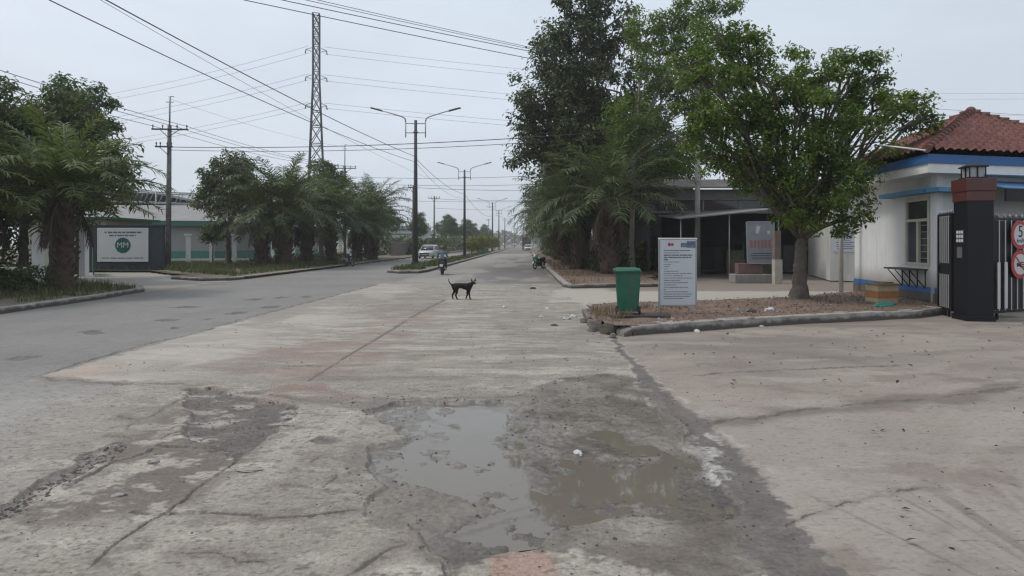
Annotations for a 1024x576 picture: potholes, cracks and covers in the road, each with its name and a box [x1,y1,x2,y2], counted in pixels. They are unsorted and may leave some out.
pothole [179,387,302,459]
crack [785,487,922,527]
crack [41,245,563,574]
pothole [361,394,748,565]
pothole [0,446,121,521]
